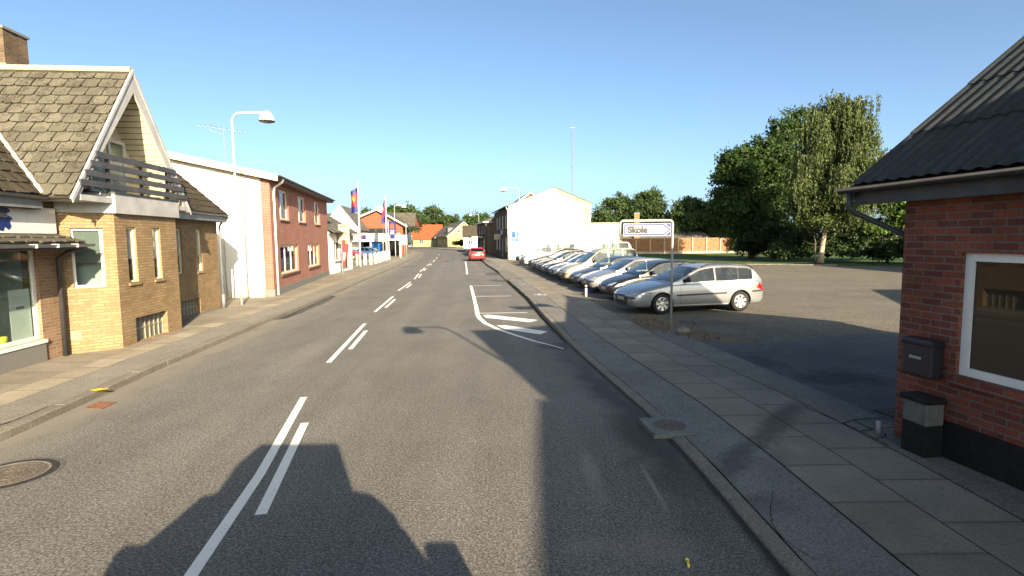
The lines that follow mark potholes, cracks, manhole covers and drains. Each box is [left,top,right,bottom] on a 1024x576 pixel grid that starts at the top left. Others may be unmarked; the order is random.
manhole cover [638,416,703,439]
crack [770,492,813,559]
manhole cover [0,457,66,491]
